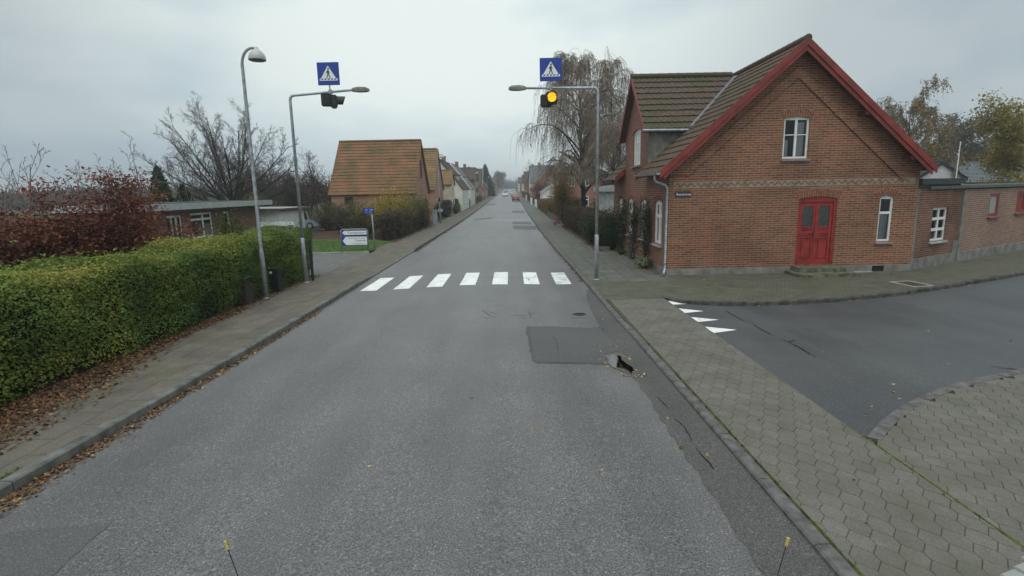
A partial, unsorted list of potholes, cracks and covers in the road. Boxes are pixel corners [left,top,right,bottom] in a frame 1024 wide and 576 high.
crack [659,399,714,469]
pothole [617,356,635,374]
